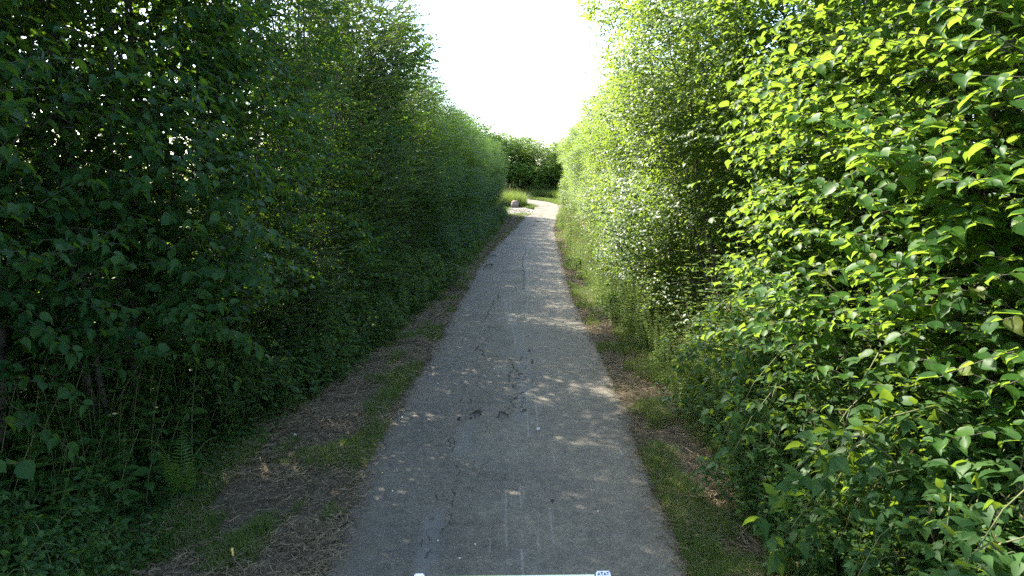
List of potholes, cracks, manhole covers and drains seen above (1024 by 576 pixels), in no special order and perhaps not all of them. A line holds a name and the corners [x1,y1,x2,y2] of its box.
crack [421,437,461,559]
crack [505,357,529,414]
crack [484,249,527,322]
